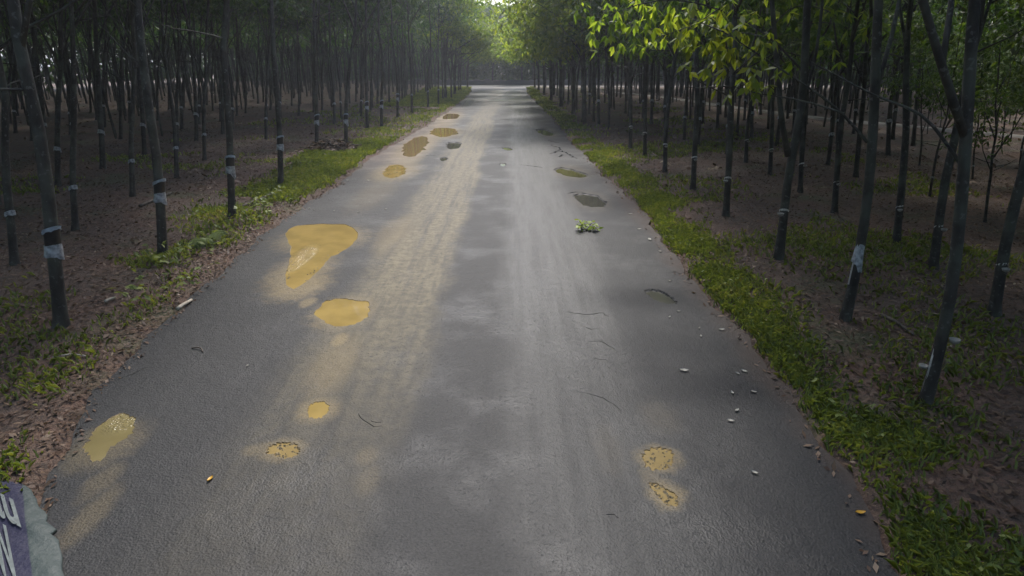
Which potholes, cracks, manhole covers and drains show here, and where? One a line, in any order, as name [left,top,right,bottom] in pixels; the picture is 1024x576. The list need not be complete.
pothole [553,167,588,178]
crack [527,140,574,168]
pothole [572,193,607,207]
pothole [643,289,678,304]
